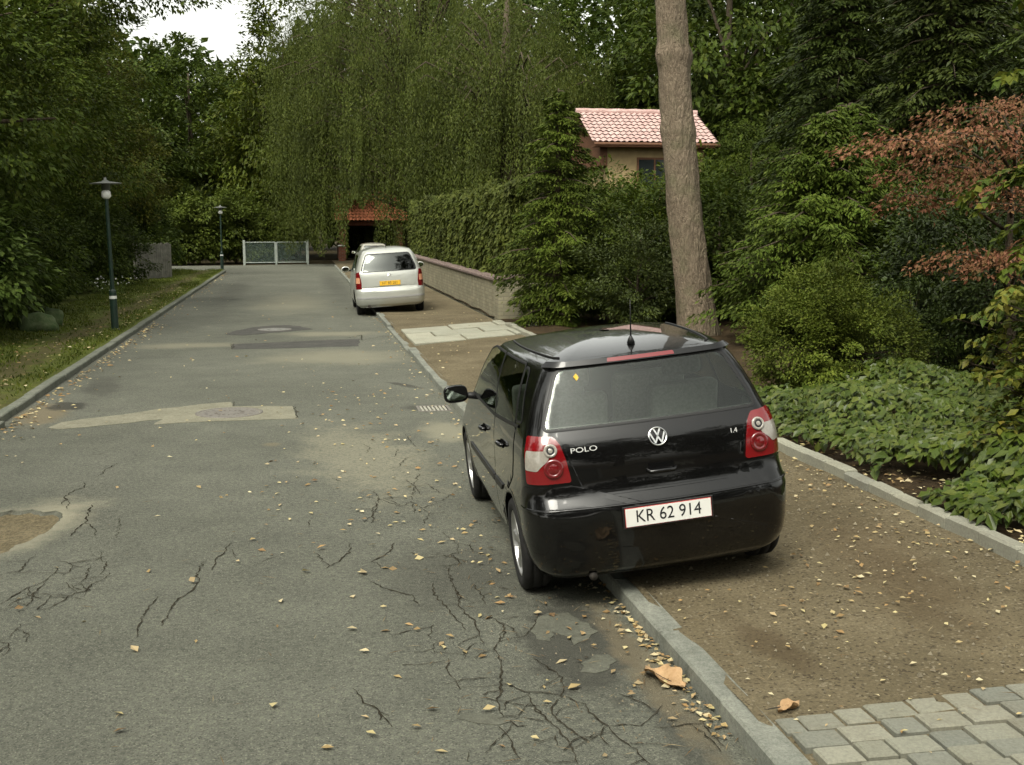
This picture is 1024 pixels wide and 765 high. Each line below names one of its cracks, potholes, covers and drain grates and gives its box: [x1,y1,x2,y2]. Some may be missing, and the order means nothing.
crack [61,454,119,536]
manhole cover [195,407,263,418]
pothole [0,509,63,554]
crack [395,544,723,764]
crack [369,543,419,604]
crack [0,552,110,656]
crack [336,435,466,561]
crack [353,688,393,727]
